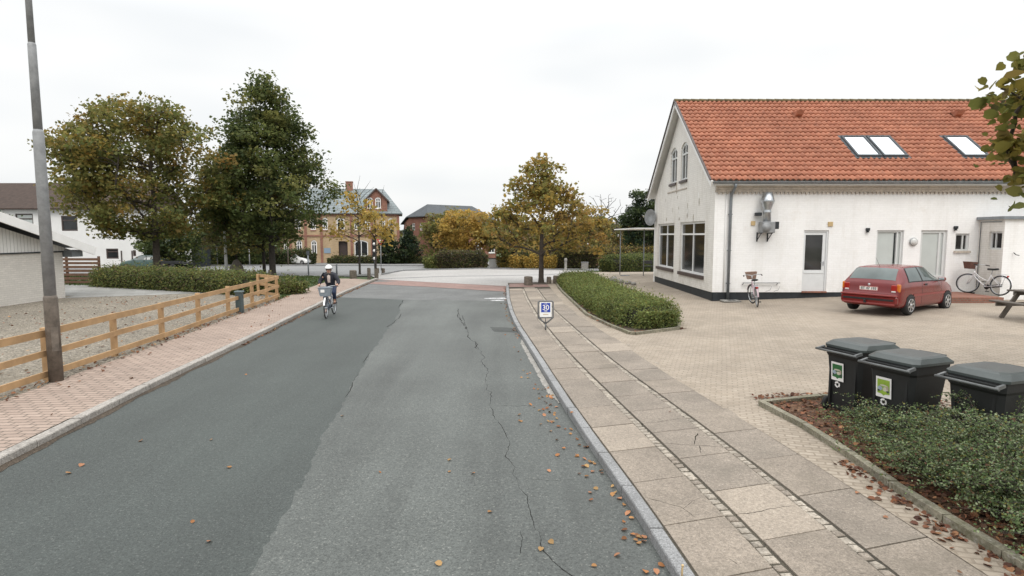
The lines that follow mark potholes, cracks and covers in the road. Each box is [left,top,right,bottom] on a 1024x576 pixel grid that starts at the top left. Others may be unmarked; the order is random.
crack [457,309,573,576]
